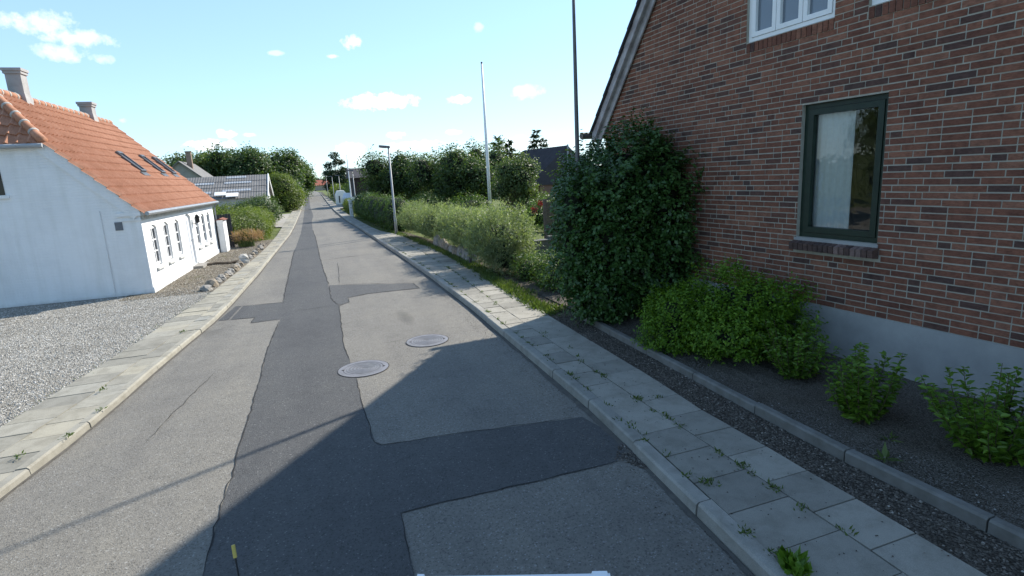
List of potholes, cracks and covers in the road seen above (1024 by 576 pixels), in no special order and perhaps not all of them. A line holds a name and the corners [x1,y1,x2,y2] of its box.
manhole cover [406,334,449,347]
crack [306,231,418,360]
manhole cover [337,360,389,378]
